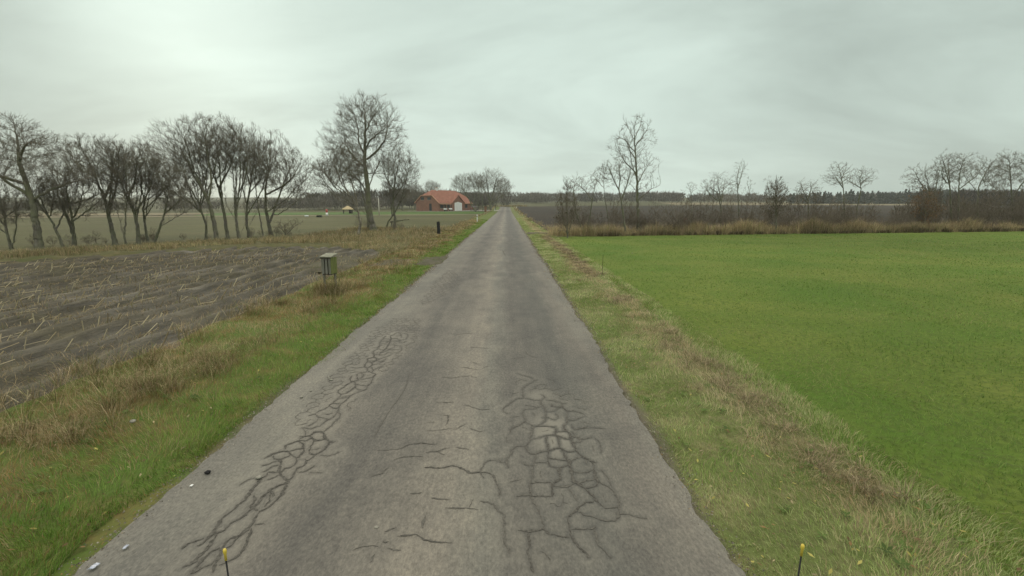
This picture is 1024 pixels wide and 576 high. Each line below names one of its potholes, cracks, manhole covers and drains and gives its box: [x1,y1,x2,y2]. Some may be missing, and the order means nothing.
crack [355,374,647,573]
